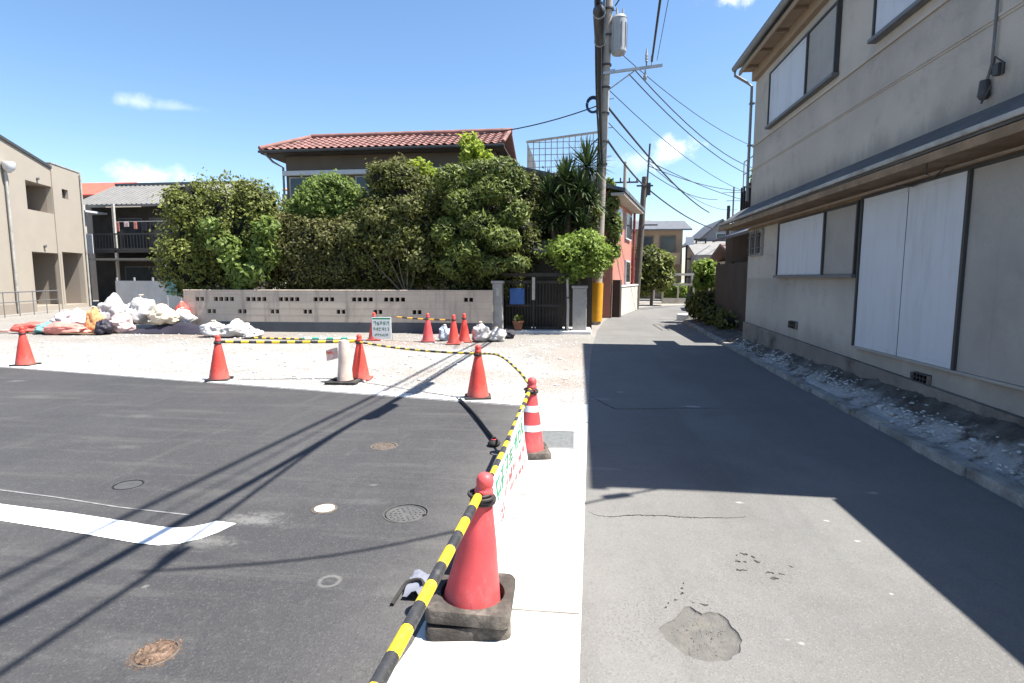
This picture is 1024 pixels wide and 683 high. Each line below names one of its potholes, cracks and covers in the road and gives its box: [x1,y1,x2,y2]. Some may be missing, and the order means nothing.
manhole cover [126,636,184,672]
manhole cover [370,442,398,450]
manhole cover [311,503,338,514]
pothole [659,606,742,662]
manhole cover [383,504,429,523]
manhole cover [112,480,145,490]
